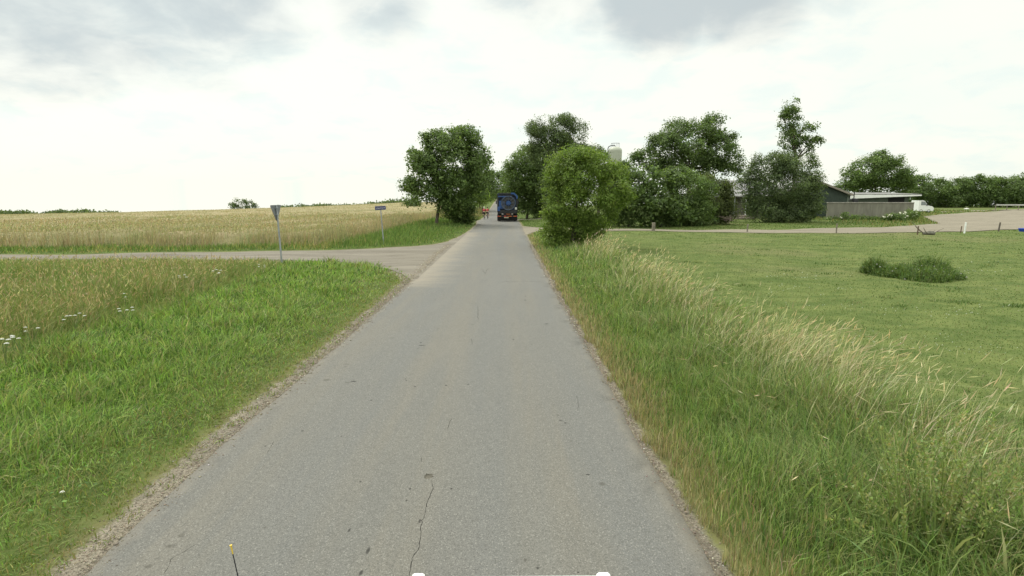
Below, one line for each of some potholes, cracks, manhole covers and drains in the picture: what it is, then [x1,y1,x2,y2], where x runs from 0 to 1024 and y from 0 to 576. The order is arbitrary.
crack [409,484,433,576]
